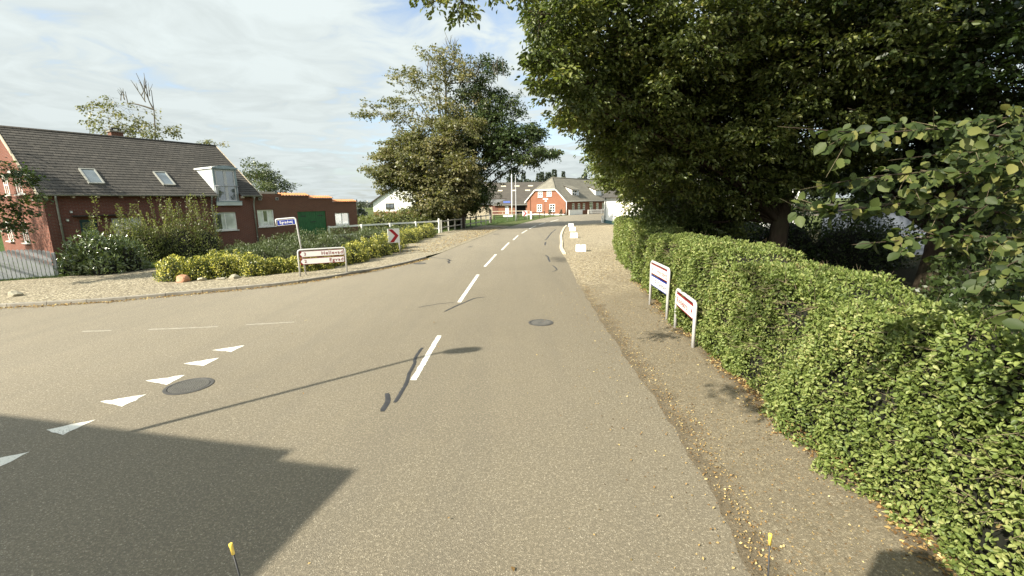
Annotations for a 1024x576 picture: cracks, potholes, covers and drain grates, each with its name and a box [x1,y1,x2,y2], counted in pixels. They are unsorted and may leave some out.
manhole cover [162,377,214,395]
